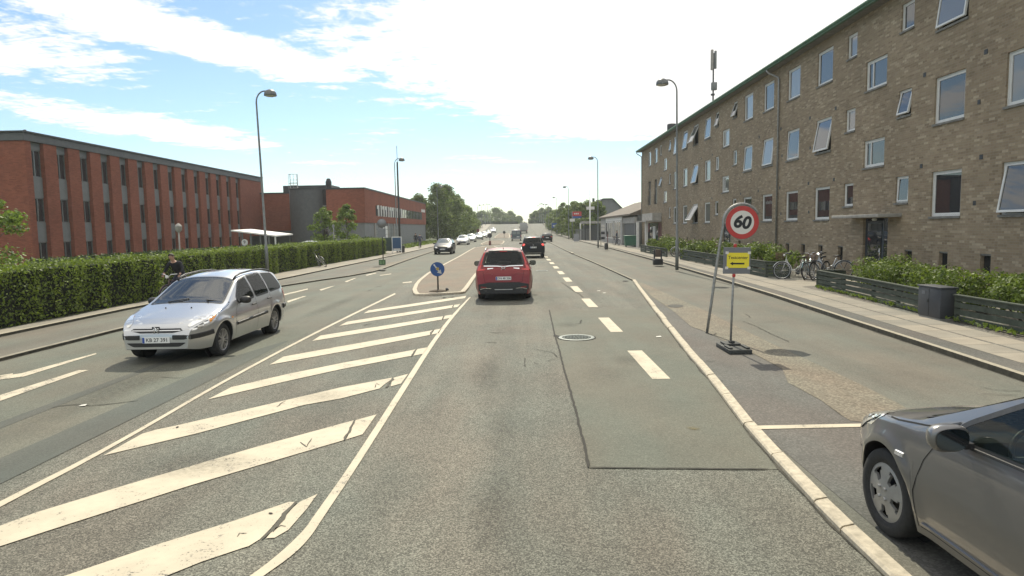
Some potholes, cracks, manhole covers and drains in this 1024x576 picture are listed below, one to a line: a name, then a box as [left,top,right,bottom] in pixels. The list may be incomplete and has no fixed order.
crack [262,501,297,538]
